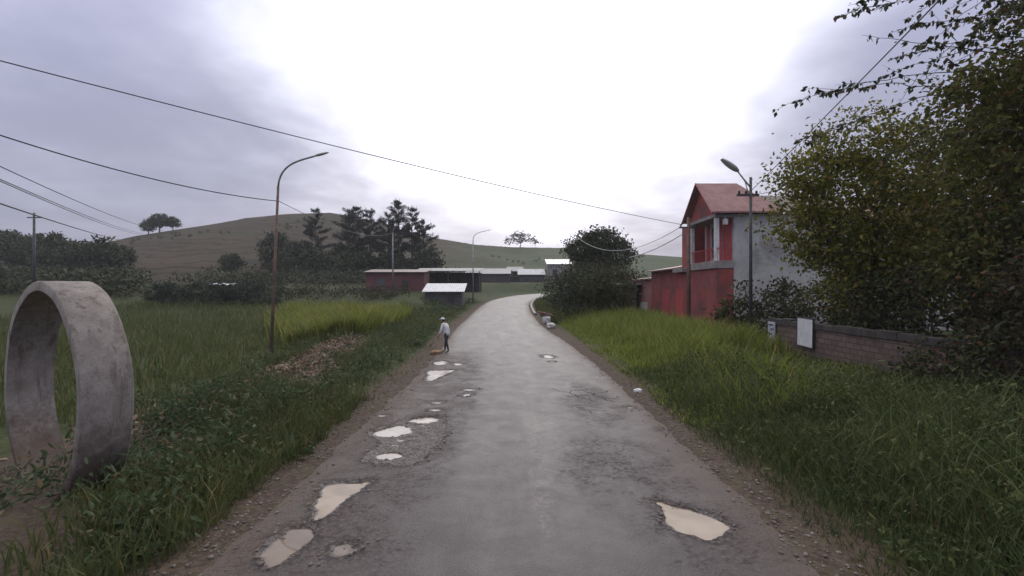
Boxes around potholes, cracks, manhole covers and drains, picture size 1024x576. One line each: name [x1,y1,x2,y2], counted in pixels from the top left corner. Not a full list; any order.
pothole [419,369,457,382]
pothole [254,521,323,570]
pothole [349,413,453,467]
crack [554,388,615,413]
pothole [649,496,746,541]
pothole [307,476,378,523]
